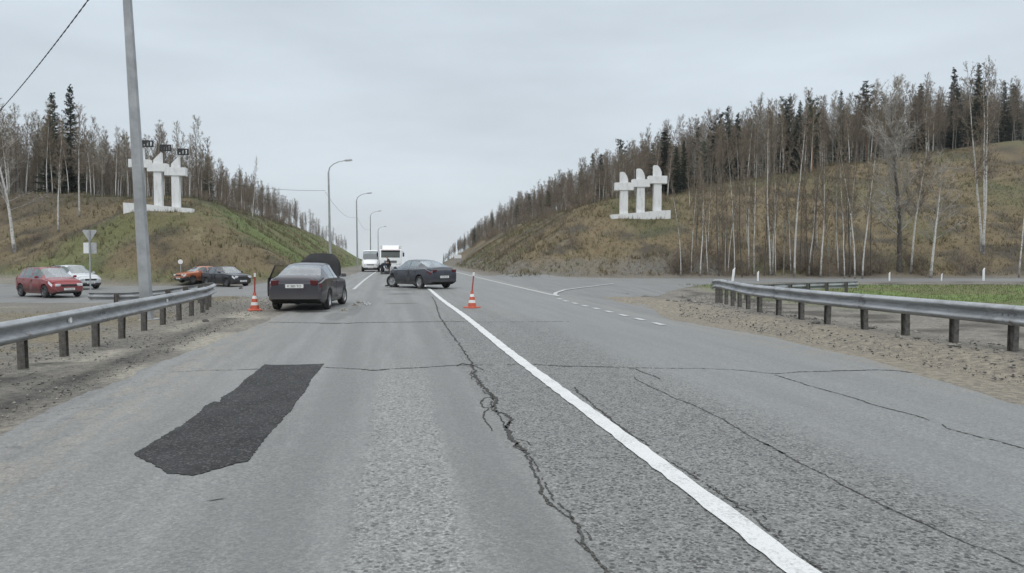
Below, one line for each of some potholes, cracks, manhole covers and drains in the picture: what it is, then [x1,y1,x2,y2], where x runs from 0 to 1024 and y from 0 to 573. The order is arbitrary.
crack [291,298,1022,573]
